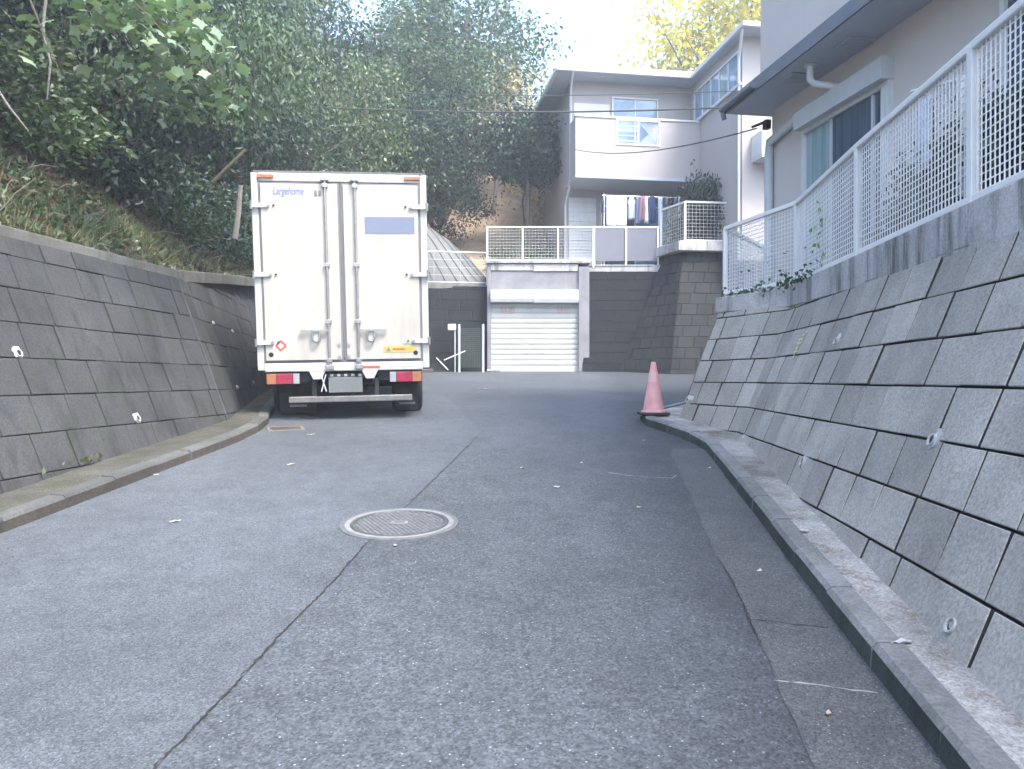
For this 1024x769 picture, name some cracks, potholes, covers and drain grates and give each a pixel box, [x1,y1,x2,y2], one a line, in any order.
crack [724,566,829,644]
manhole cover [339,508,459,541]
